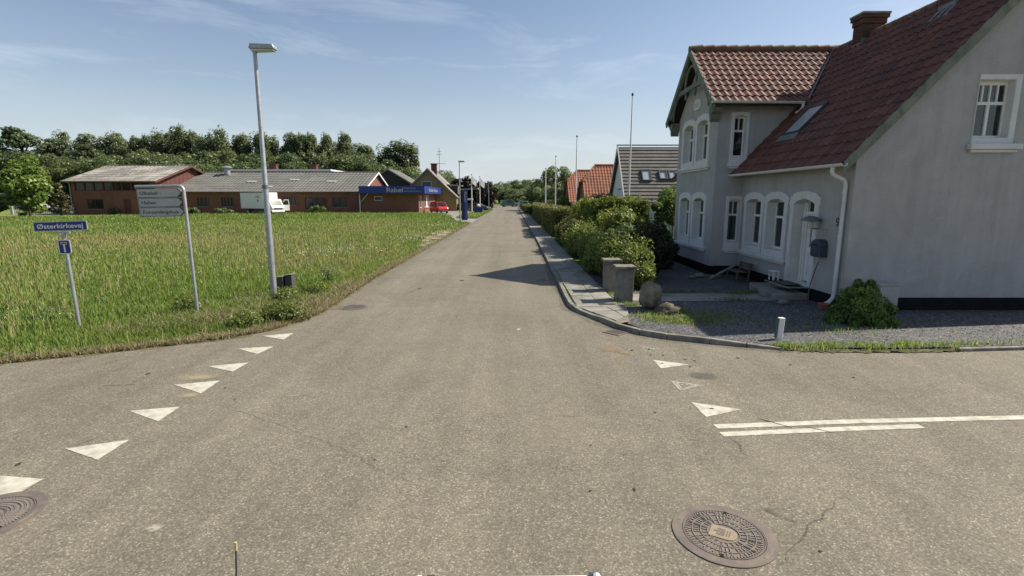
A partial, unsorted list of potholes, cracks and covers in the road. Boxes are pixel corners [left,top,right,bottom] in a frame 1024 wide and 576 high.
manhole cover [672,505,779,569]
manhole cover [0,491,49,534]
